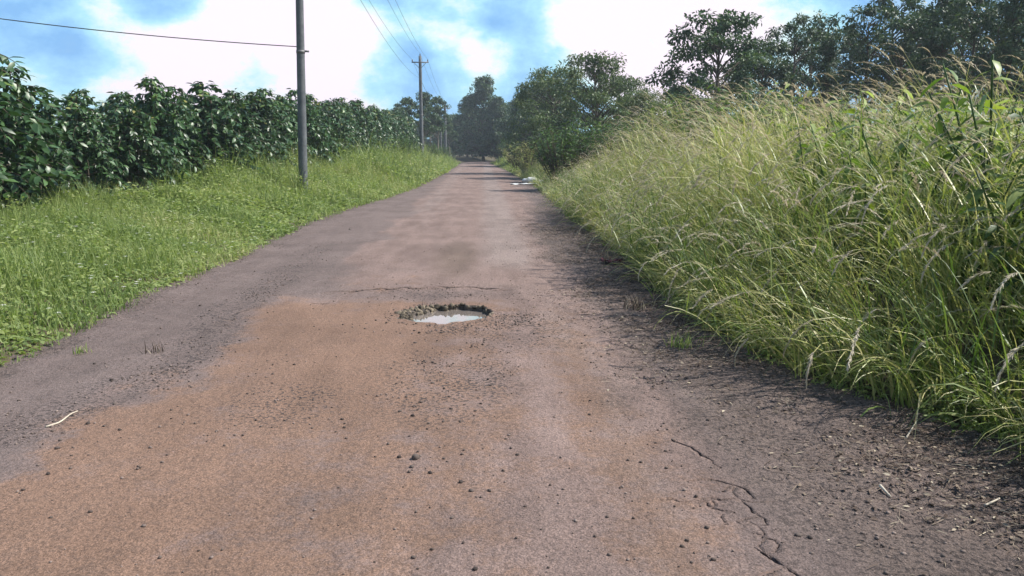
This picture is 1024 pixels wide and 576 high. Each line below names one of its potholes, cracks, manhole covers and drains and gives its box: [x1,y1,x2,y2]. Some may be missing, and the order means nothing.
crack [660,439,802,576]
pothole [392,302,497,326]
crack [232,273,500,315]
